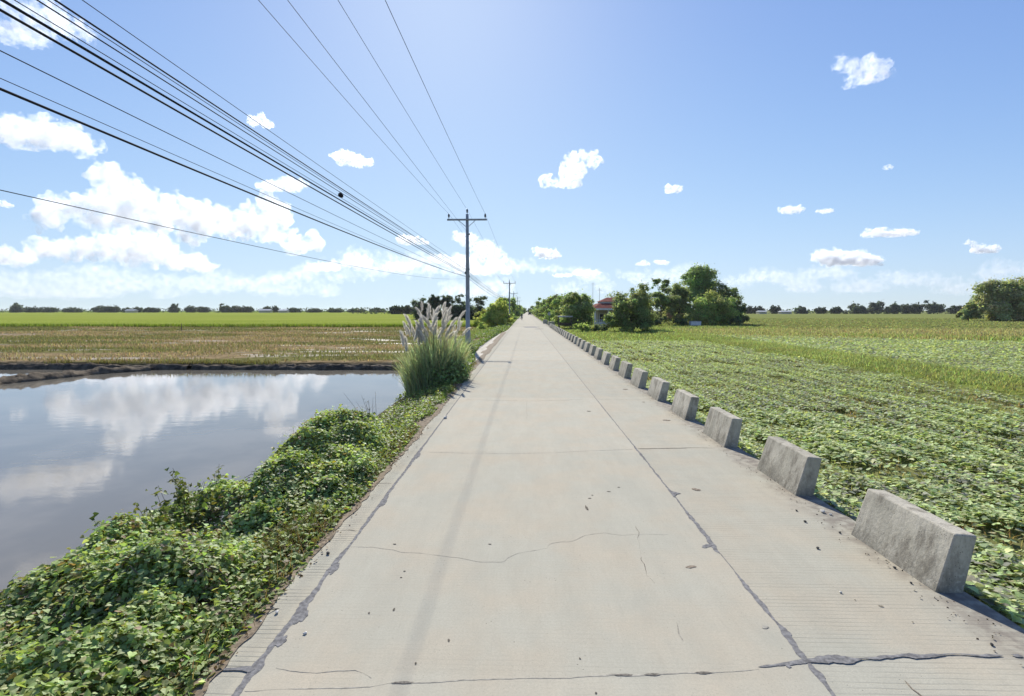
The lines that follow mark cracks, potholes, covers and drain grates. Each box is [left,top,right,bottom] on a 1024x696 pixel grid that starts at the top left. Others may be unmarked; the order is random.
crack [374,526,662,581]
